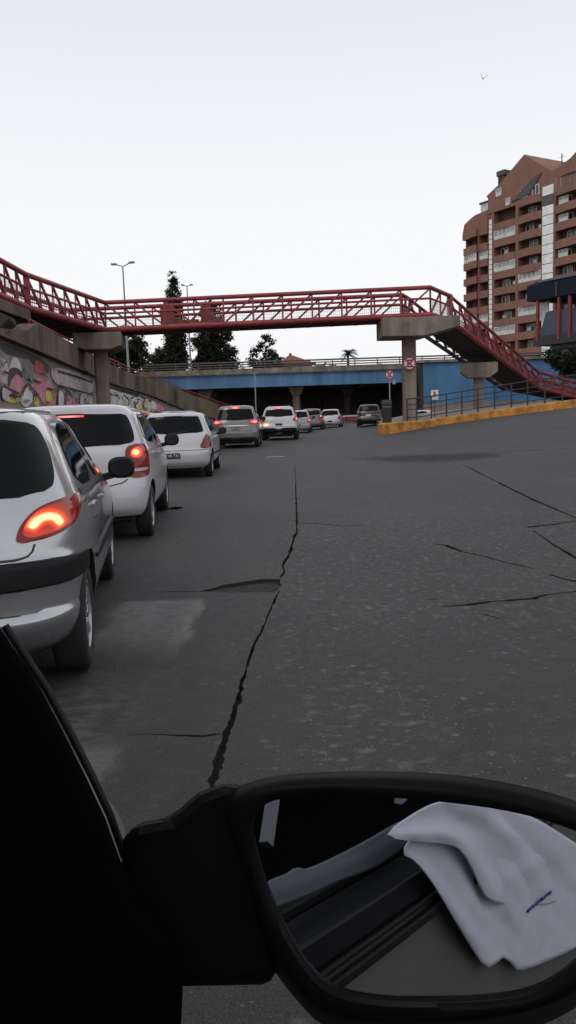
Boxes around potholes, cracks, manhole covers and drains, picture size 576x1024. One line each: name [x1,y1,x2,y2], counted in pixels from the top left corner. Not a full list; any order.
pothole [199,579,282,593]
crack [431,464,576,619]
crack [135,465,354,788]
